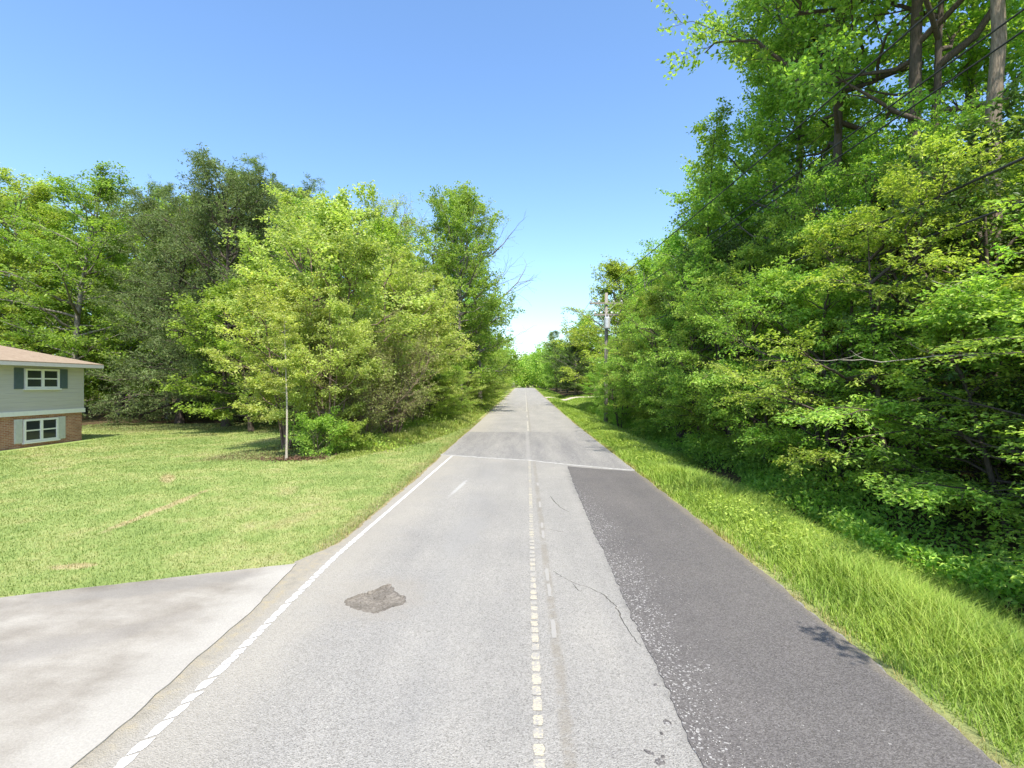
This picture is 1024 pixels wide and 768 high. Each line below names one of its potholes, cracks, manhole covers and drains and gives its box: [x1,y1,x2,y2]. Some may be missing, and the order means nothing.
crack [554,571,640,645]
